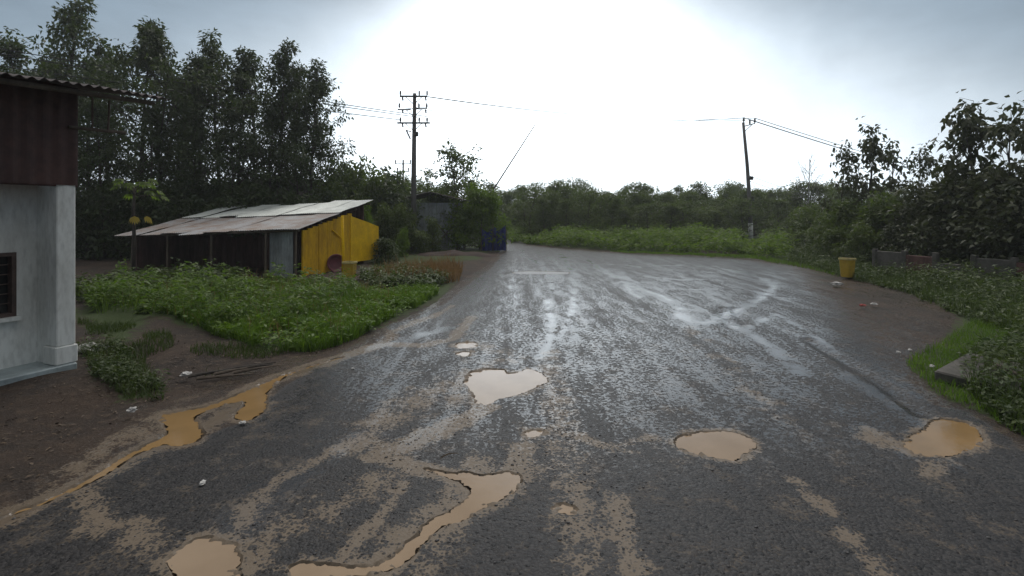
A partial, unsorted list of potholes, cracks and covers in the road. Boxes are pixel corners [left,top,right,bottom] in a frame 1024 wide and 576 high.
pothole [522,429,551,437]
pothole [163,535,244,576]
pothole [285,467,523,576]
pothole [900,417,986,458]
pothole [550,502,579,515]
pothole [673,430,759,461]
pothole [463,368,549,405]
